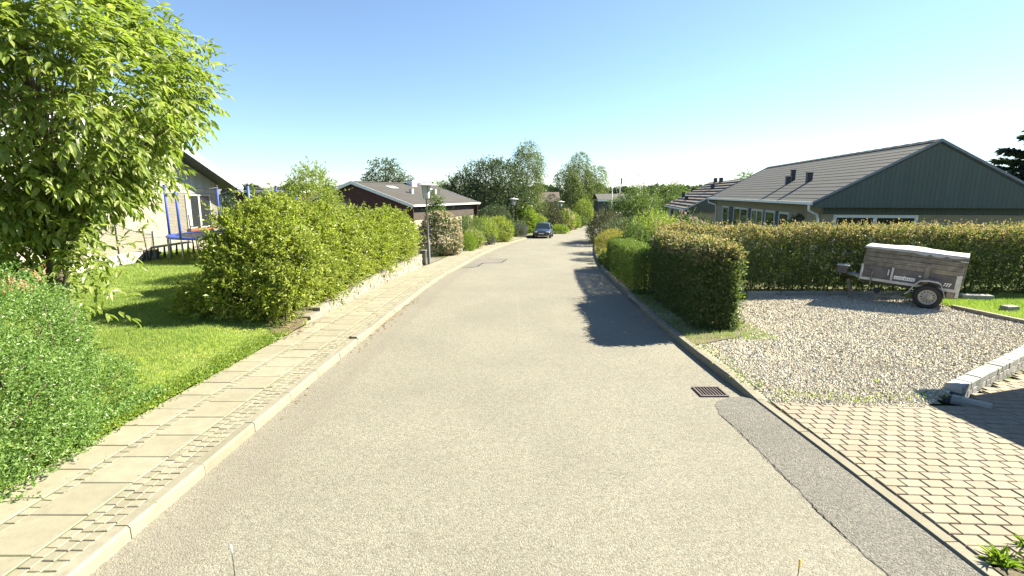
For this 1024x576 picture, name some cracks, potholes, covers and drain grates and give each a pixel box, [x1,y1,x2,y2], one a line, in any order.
drain grate [692,386,729,397]
